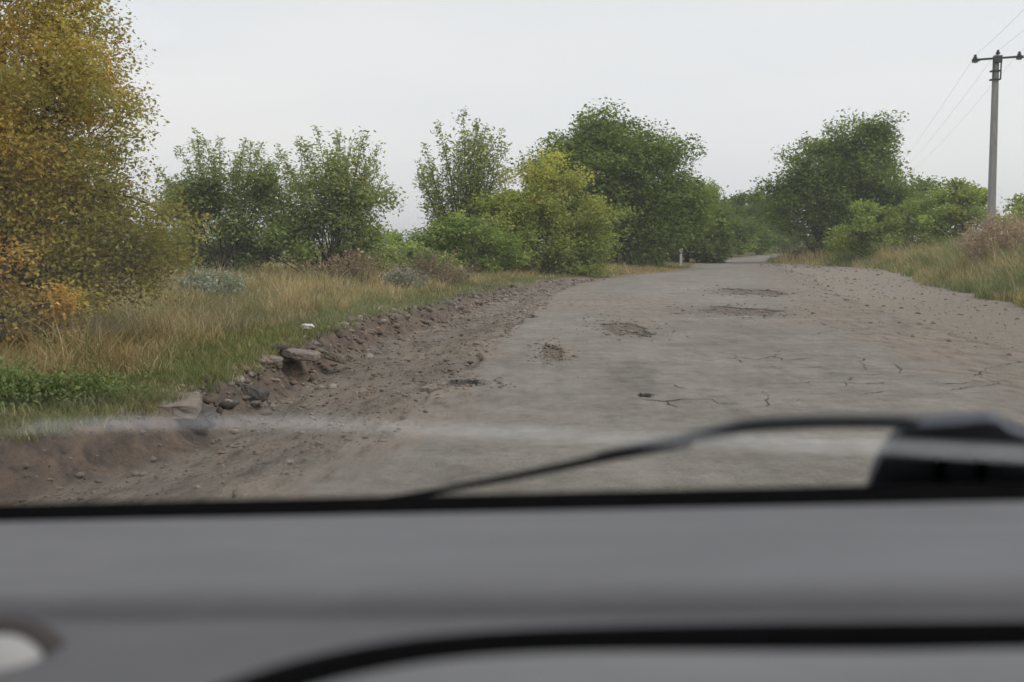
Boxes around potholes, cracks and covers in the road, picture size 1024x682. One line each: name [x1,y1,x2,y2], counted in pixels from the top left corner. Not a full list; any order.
pothole [693,306,791,317]
pothole [719,288,791,297]
crack [703,322,1021,406]
pothole [421,377,498,390]
pothole [594,322,659,338]
pothole [529,343,573,362]
